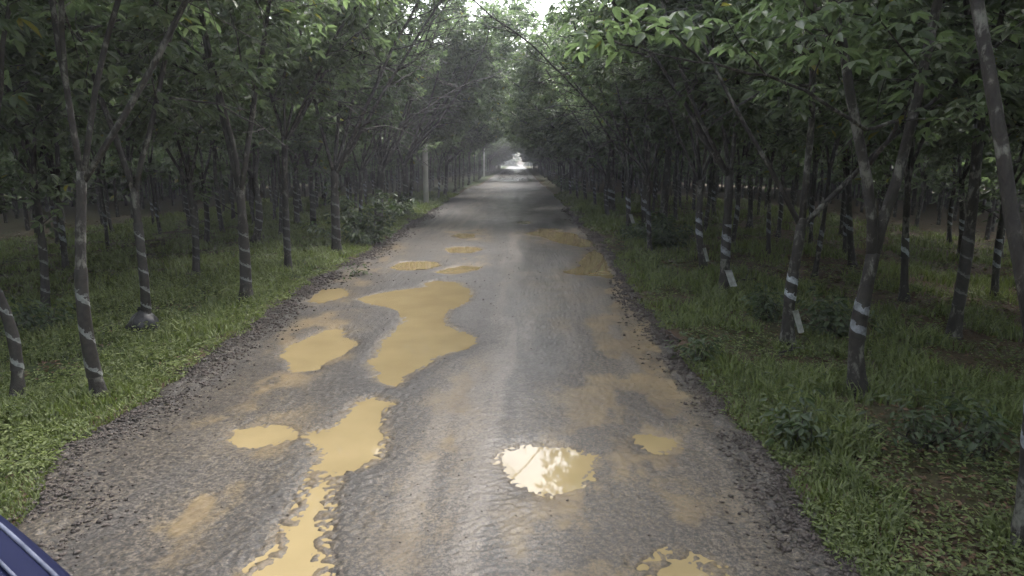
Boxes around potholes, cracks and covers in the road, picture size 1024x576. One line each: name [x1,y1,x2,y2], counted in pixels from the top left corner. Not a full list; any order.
pothole [218,421,301,450]
pothole [490,439,608,500]
pothole [561,247,618,279]
pothole [627,429,688,455]
pothole [304,286,356,304]
pothole [443,245,486,253]
pothole [624,542,740,576]
pothole [356,279,480,388]
pothole [229,466,348,576]
pothole [298,393,400,472]
pothole [433,264,485,275]
pothole [387,260,445,271]
